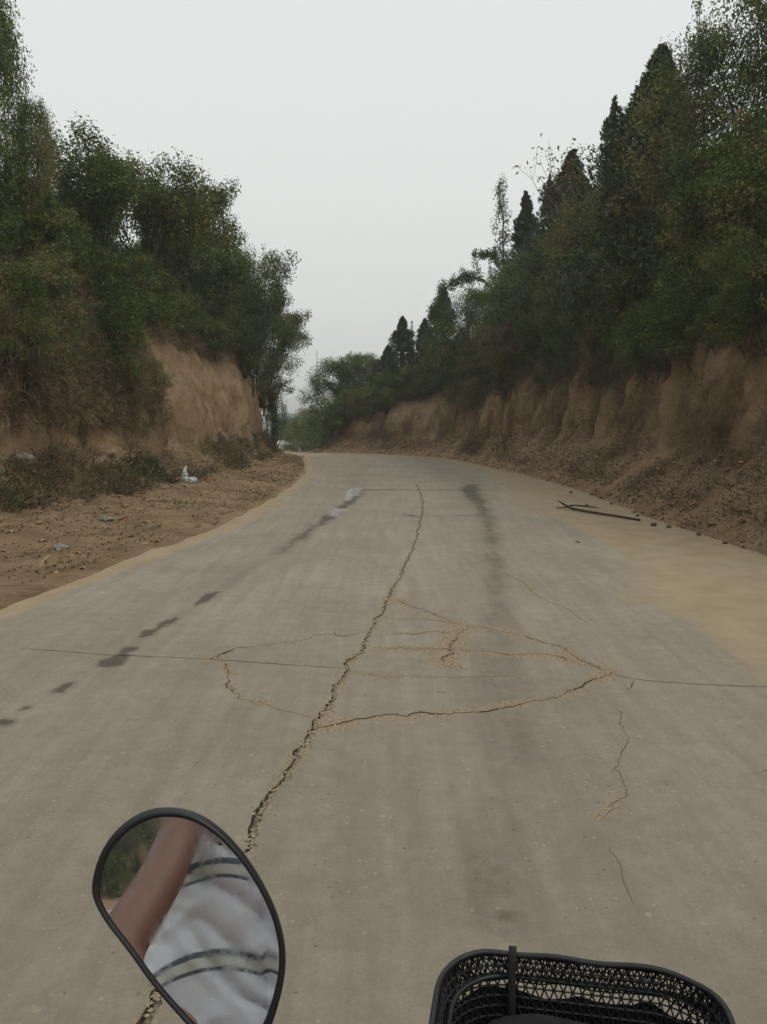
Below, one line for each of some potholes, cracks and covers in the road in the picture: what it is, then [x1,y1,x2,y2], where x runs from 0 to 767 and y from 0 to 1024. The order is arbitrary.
crack [24,485,766,1024]
